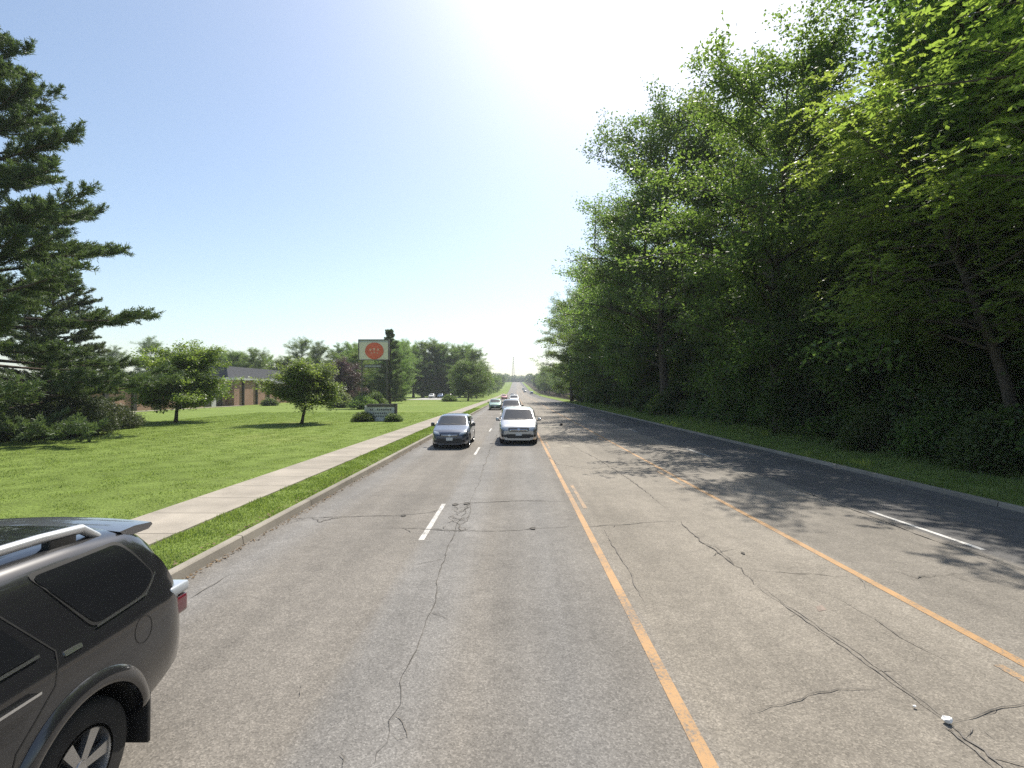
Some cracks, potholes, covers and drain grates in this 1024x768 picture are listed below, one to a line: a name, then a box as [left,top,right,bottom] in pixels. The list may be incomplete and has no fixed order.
crack [589,521,660,601]
crack [748,686,880,713]
crack [938,704,1024,768]
crack [292,500,567,761]
crack [681,522,866,588]
